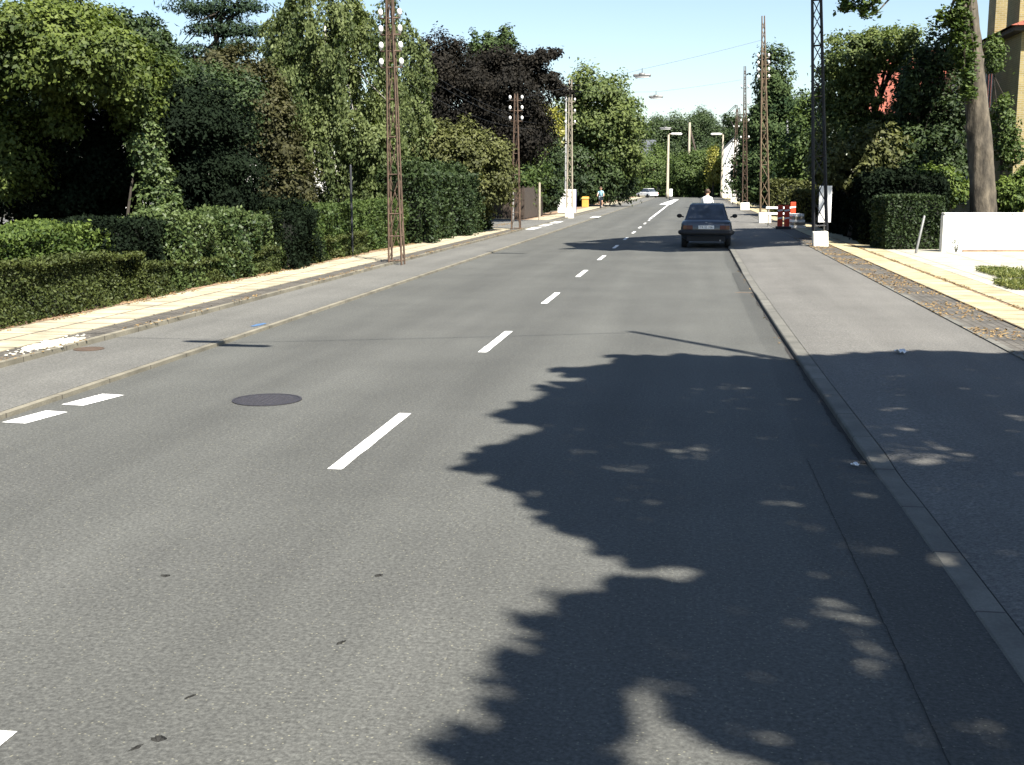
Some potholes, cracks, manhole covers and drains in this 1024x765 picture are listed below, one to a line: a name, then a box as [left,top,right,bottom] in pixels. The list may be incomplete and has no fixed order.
manhole cover [232,393,302,406]
